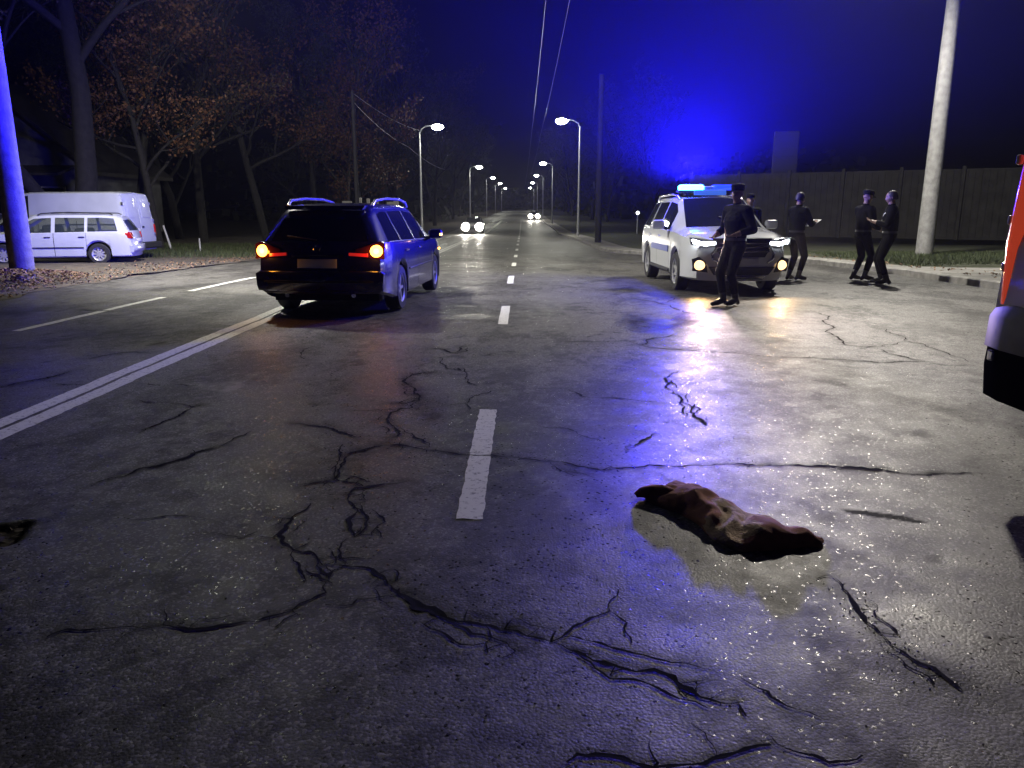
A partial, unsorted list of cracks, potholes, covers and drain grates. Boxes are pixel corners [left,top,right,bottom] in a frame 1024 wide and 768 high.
crack [820,313,969,366]
crack [572,370,707,450]
crack [356,346,495,447]
pothole [0,524,29,547]
crack [92,431,251,484]
crack [816,575,963,691]
crack [46,444,863,768]
crack [134,384,200,431]
